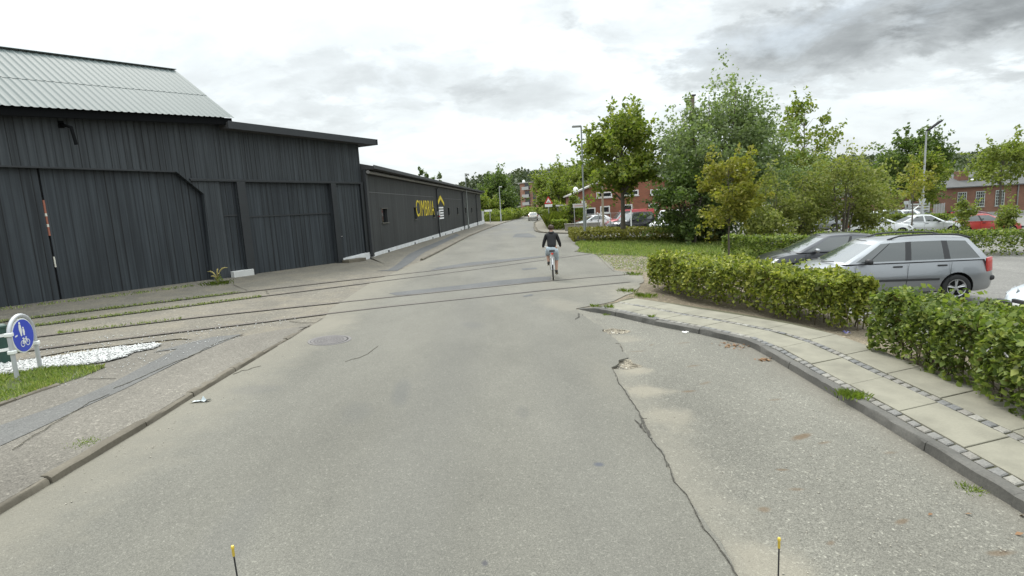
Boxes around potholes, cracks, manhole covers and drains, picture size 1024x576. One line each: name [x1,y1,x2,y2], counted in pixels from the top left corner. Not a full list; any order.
manhole cover [307,335,351,346]
pothole [613,359,643,369]
crack [612,343,738,576]
